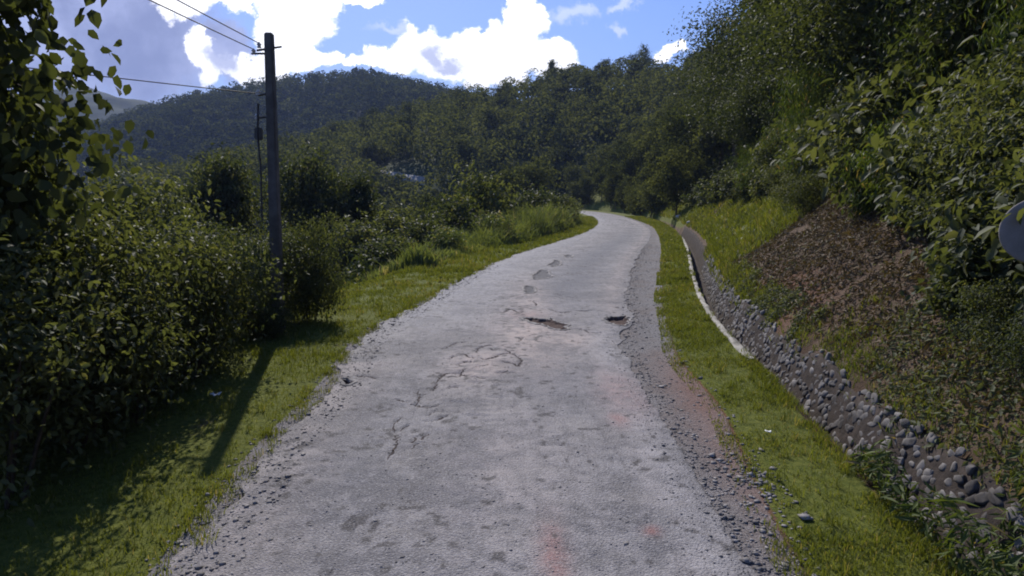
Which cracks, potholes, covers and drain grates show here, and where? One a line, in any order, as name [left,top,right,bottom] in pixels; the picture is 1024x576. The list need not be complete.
crack [387,339,523,459]
pothole [519,317,571,330]
pothole [601,315,634,326]
pothole [529,269,554,280]
pothole [521,285,537,293]
